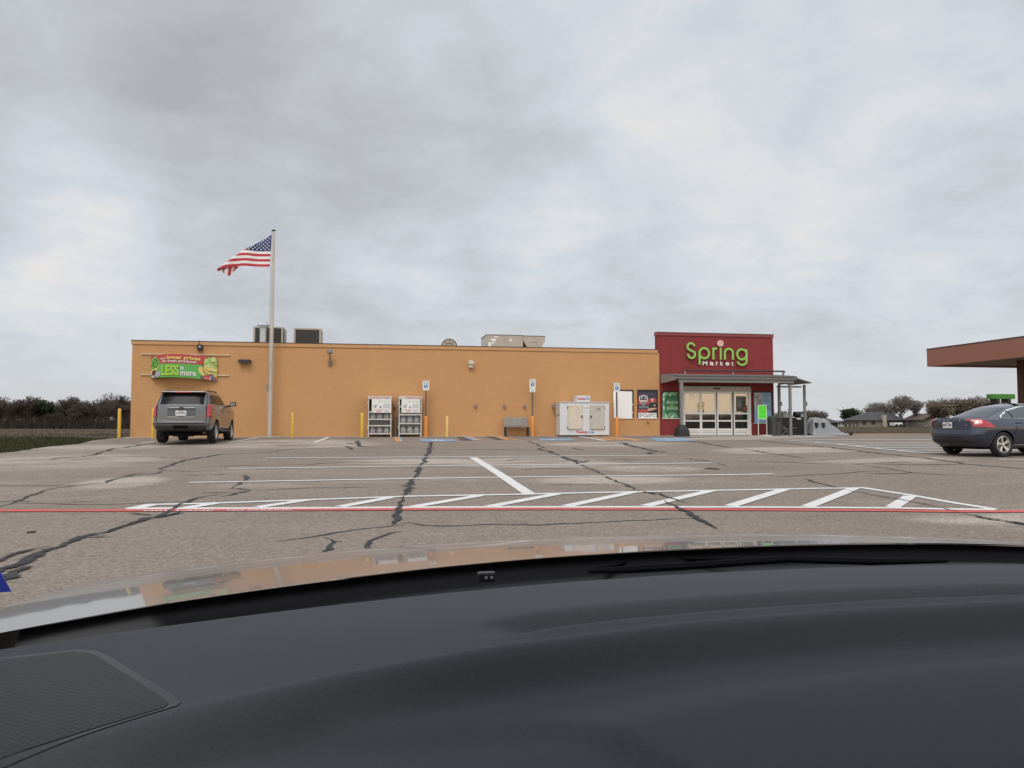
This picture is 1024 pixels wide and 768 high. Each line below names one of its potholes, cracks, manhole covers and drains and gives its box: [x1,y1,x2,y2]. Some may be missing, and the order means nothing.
crack [505,442,667,485]
